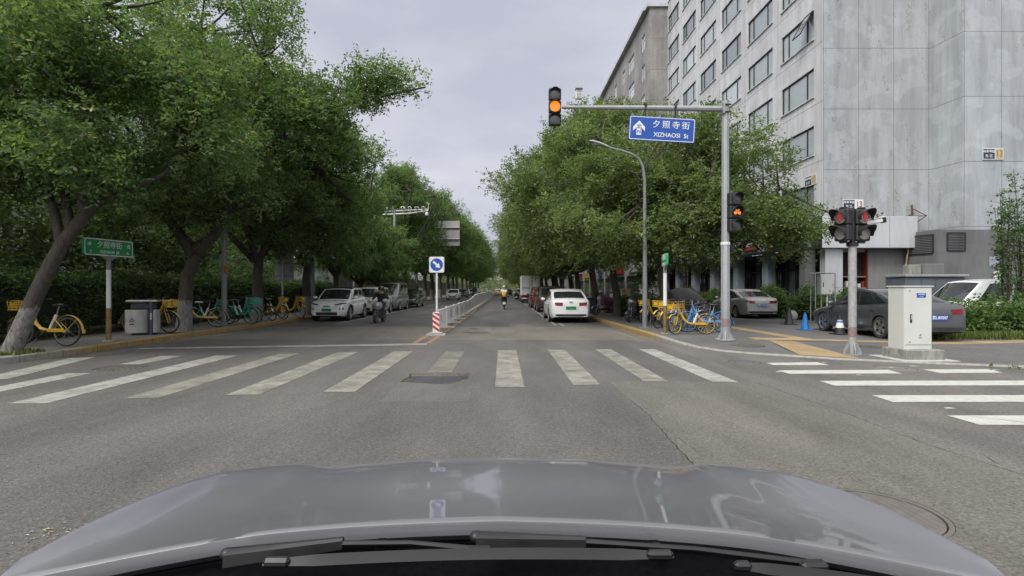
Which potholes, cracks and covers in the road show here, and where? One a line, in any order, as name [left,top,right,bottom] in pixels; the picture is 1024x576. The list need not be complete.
manhole cover [838,488,955,538]
